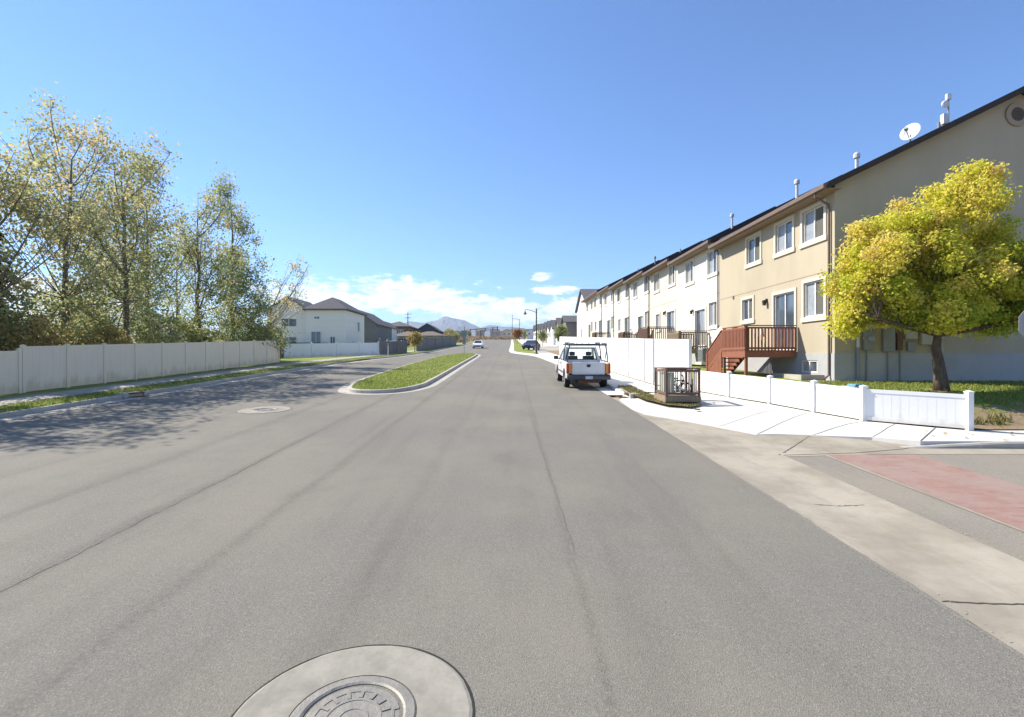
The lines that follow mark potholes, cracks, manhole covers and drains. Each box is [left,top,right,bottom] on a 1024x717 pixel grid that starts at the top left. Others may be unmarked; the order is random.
manhole cover [231,644,475,717]
crack [524,396,576,554]
manhole cover [236,406,292,414]
